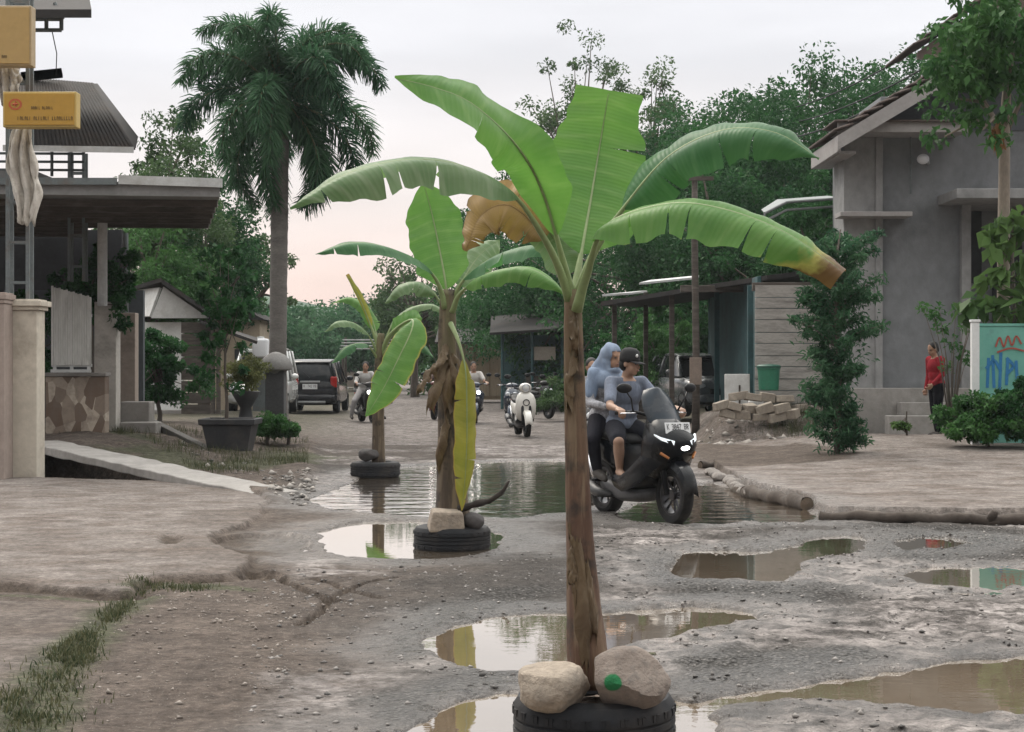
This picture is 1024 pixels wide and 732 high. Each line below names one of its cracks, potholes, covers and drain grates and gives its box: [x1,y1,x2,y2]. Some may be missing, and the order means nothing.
crack [286,575,405,626]
pothole [892,534,973,550]
pothole [418,600,767,671]
pothole [400,650,1024,732]
pothole [303,517,511,559]
pothole [872,562,1024,595]
pothole [666,532,890,586]
pothole [309,459,607,518]
